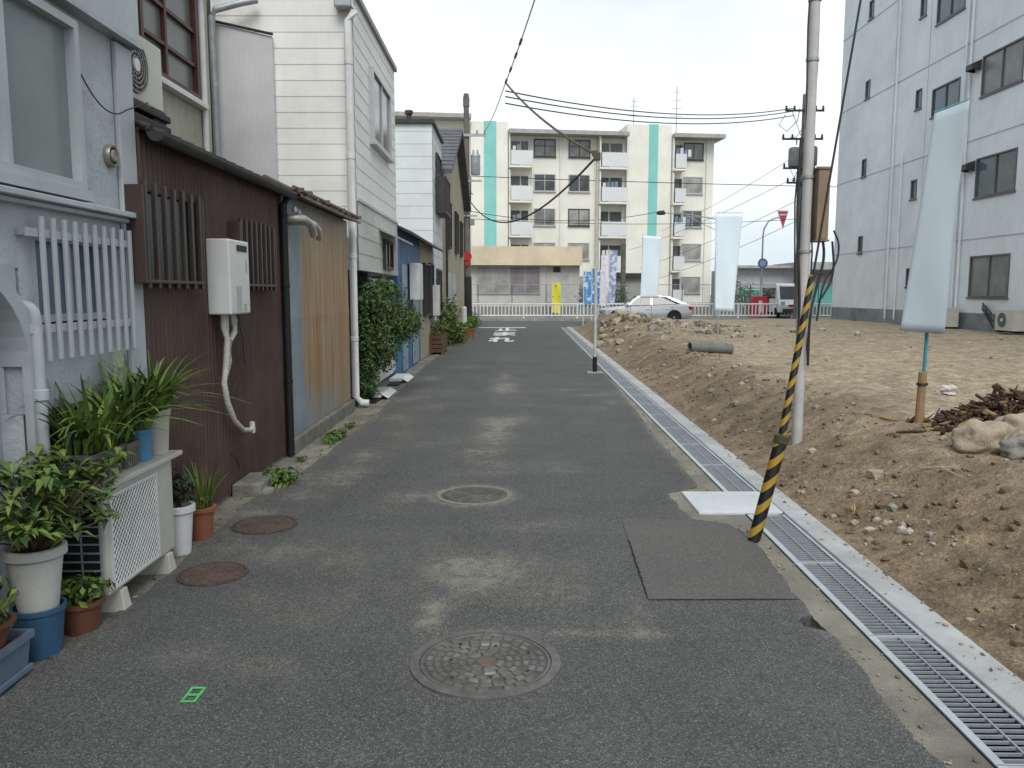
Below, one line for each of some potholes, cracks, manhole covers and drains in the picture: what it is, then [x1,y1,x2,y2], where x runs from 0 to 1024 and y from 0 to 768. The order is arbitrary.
drain grate [621,387,645,395]
manhole cover [410,629,561,700]
drain grate [868,636,1024,767]
drain grate [697,464,757,491]
drain grate [677,444,726,465]
manhole cover [176,561,249,587]
drain grate [637,404,667,415]
drain grate [661,428,702,444]
drain grate [628,395,655,404]
drain grate [648,414,683,428]
manhole cover [436,486,512,505]
pothole [802,618,827,630]
